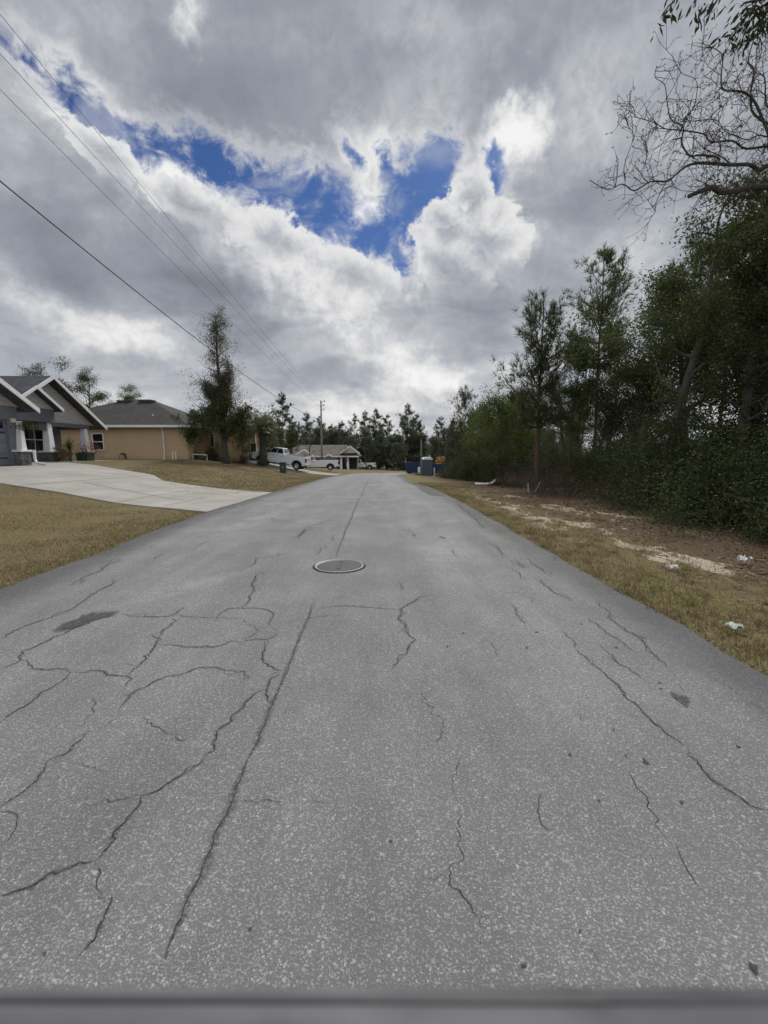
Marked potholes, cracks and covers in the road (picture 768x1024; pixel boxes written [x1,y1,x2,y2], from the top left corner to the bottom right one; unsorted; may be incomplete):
crack [311,588,429,668]
crack [430,815,486,946]
crack [621,768,705,892]
crack [3,554,282,957]
manhole cover [312,559,366,574]
crack [564,602,687,740]
